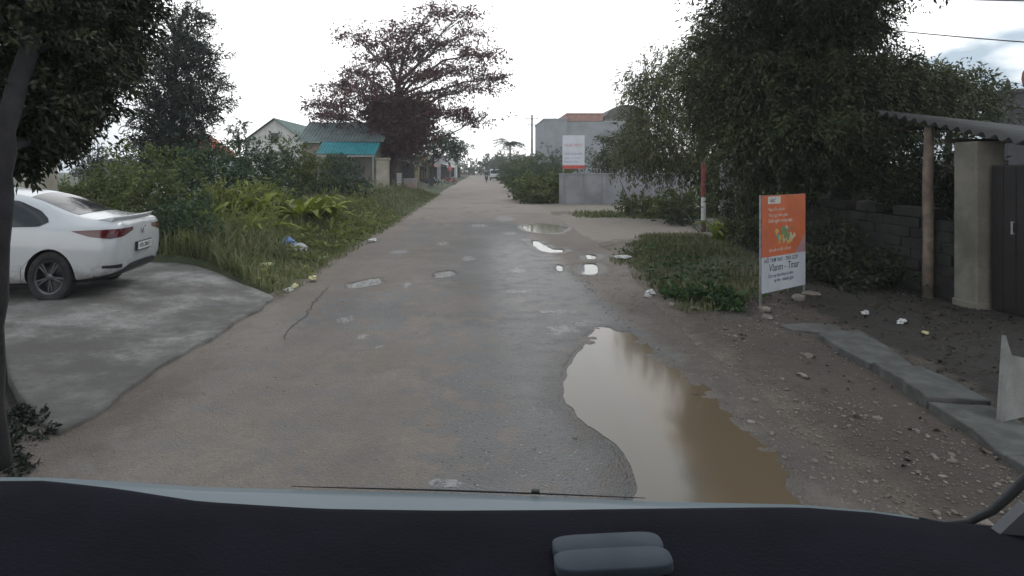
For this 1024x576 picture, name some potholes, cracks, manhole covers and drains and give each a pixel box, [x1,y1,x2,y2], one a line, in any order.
pothole [431,270,458,279]
pothole [559,327,808,505]
pothole [520,223,571,234]
pothole [344,278,385,289]
pothole [529,241,567,253]
pothole [578,263,600,275]
crack [284,288,328,339]
